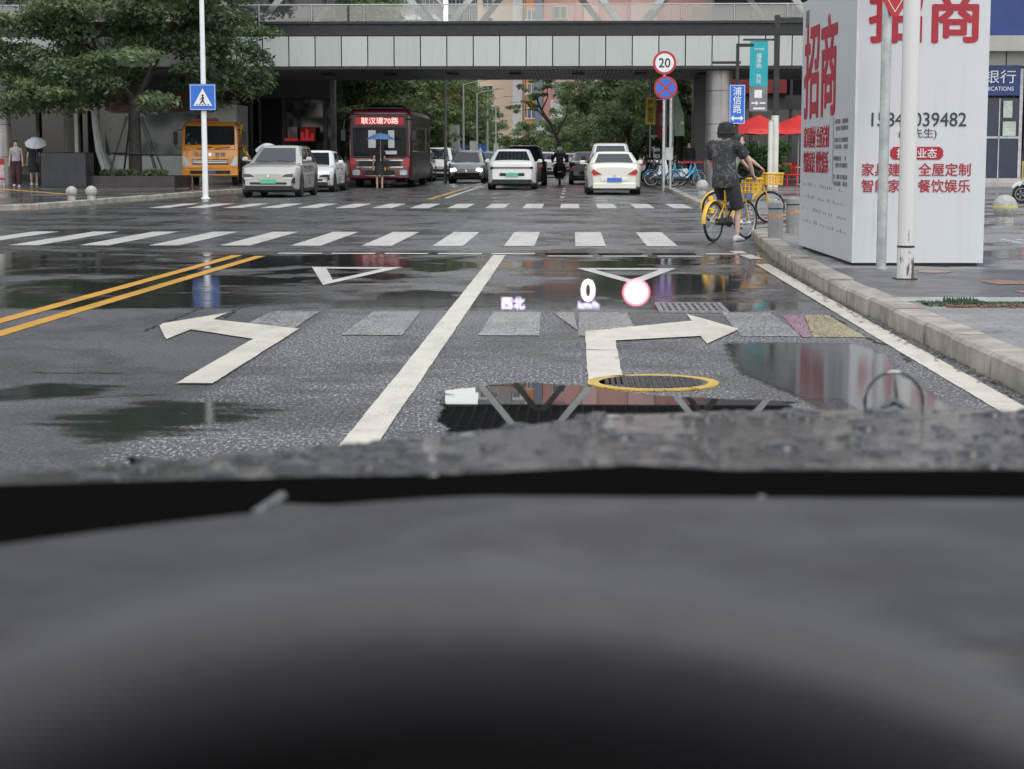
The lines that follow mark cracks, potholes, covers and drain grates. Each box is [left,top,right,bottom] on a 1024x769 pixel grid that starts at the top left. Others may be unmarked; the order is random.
manhole cover [587,374,719,391]
drain grate [654,302,729,313]
